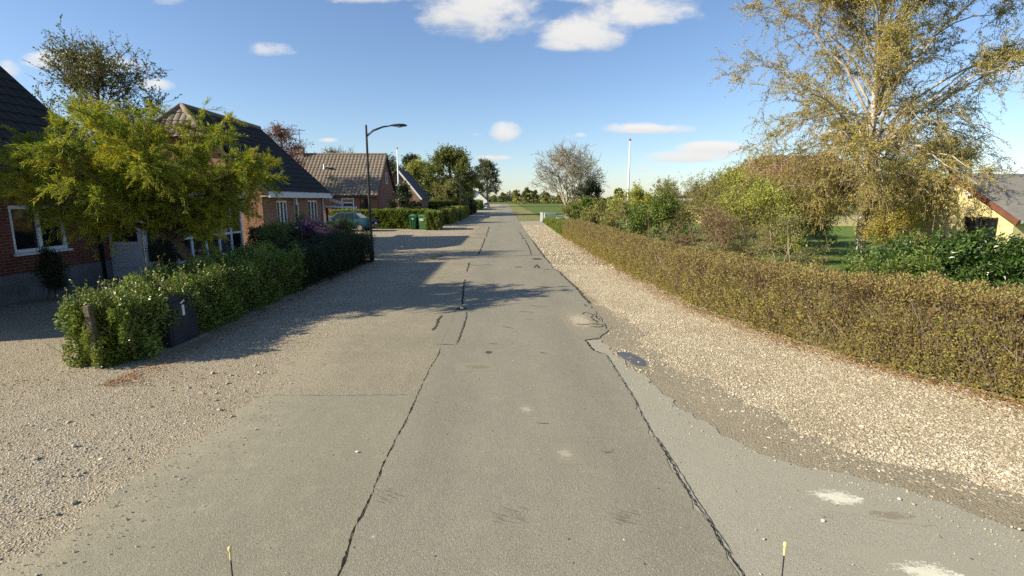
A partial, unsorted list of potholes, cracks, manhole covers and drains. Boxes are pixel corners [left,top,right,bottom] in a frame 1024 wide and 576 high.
crack [525,235,744,576]
crack [337,312,467,576]
